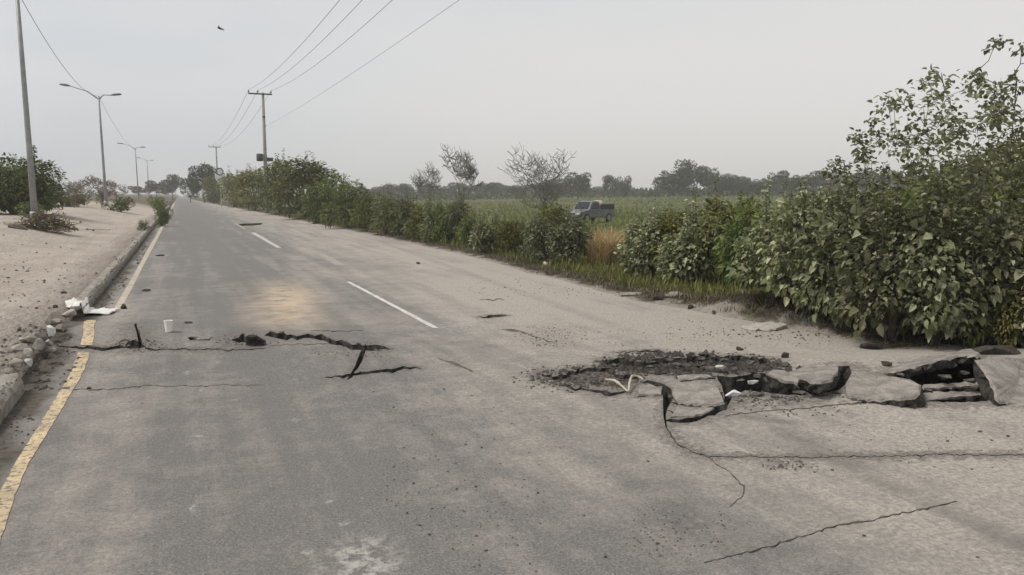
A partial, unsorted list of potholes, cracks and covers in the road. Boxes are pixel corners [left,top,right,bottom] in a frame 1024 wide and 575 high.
crack [438,358,473,372]
pothole [604,354,770,377]
crack [556,380,1020,563]
crack [481,298,555,344]
pothole [812,366,851,407]
crack [57,330,421,391]
pothole [905,363,975,387]
pothole [717,373,804,413]
